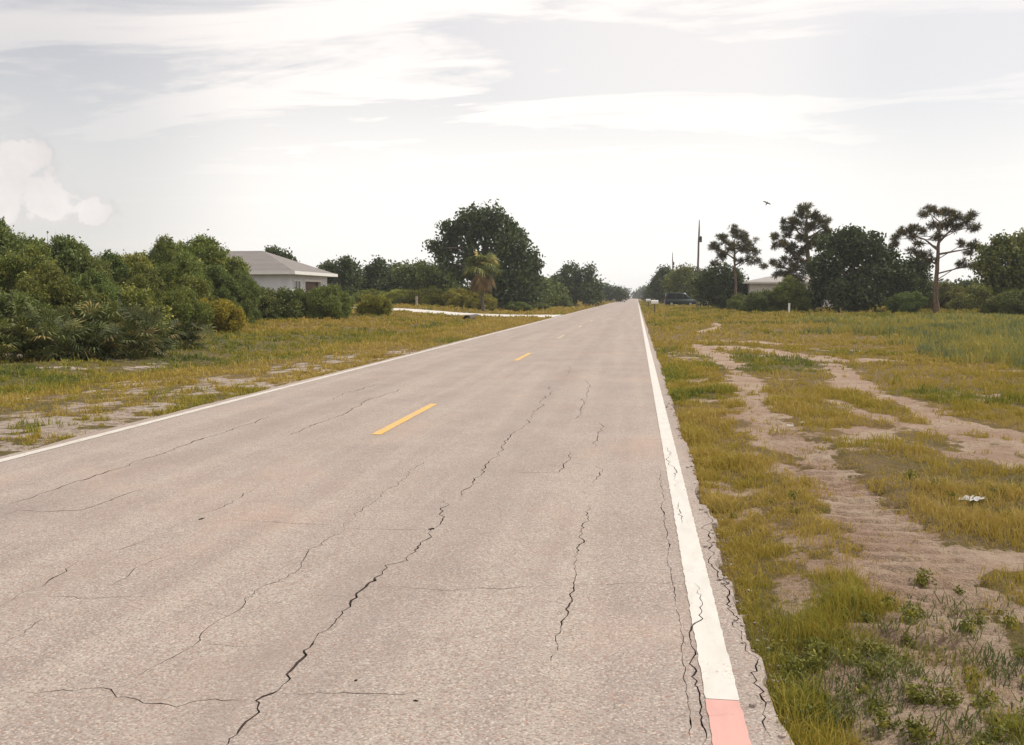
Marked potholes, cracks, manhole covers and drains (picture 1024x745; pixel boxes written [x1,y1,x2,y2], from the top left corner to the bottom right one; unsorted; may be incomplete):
crack [424,459,771,741]
crack [14,385,398,512]
crack [30,501,448,745]
crack [461,370,591,497]
crack [132,463,424,677]
